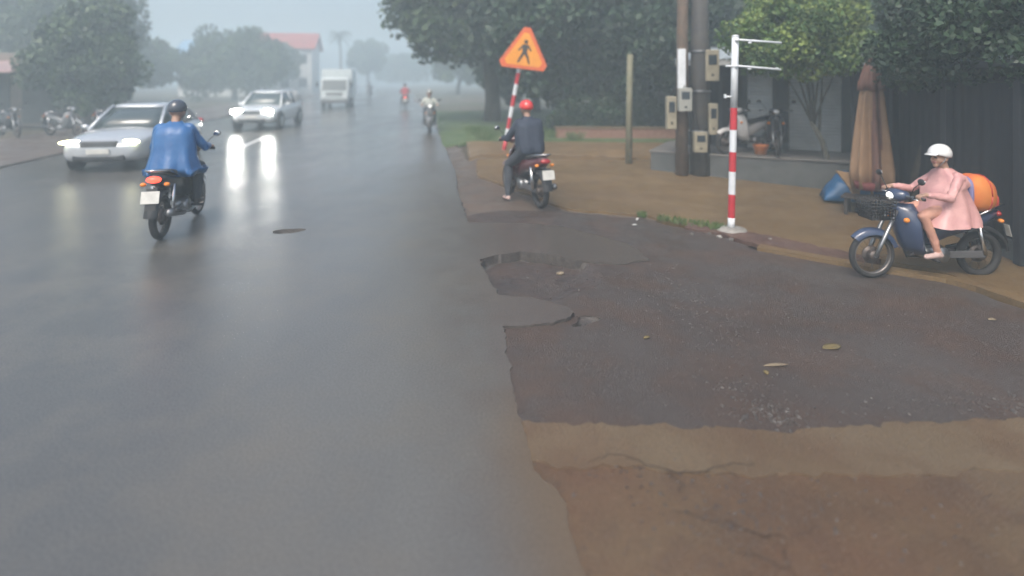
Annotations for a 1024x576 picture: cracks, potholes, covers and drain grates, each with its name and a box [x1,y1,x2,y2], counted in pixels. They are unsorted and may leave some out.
crack [674,510,821,569]
crack [587,454,753,491]
